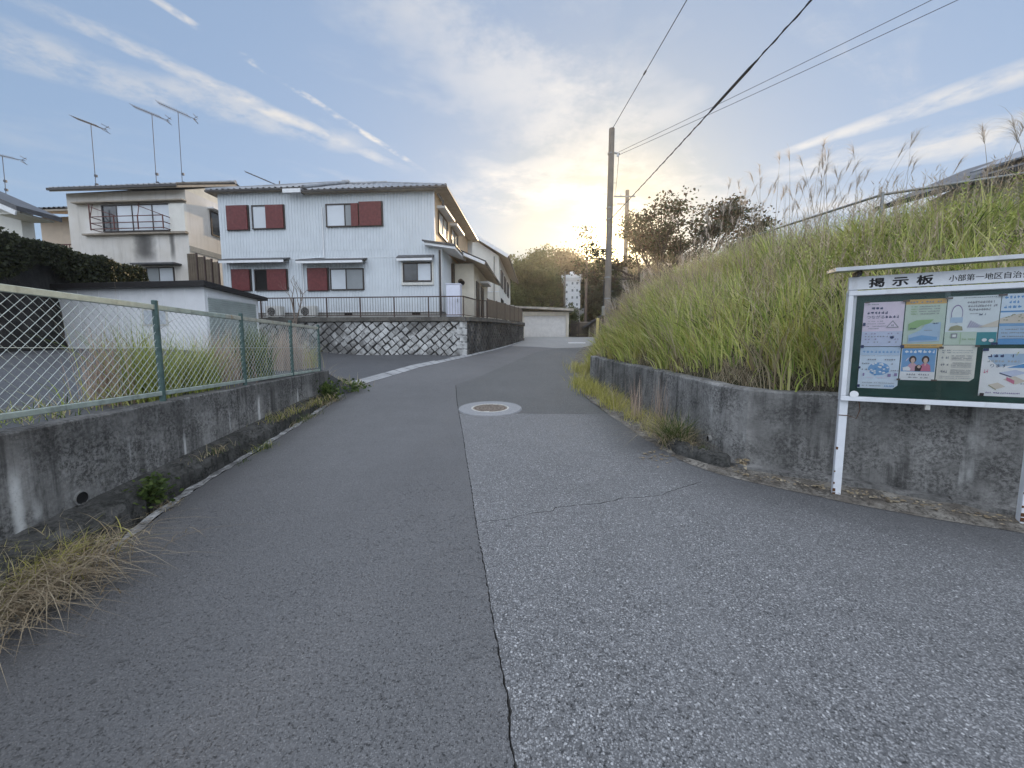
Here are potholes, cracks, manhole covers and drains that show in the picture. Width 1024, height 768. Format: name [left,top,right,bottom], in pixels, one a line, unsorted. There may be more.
crack [483,482,699,522]
manhole cover [458,401,522,416]
